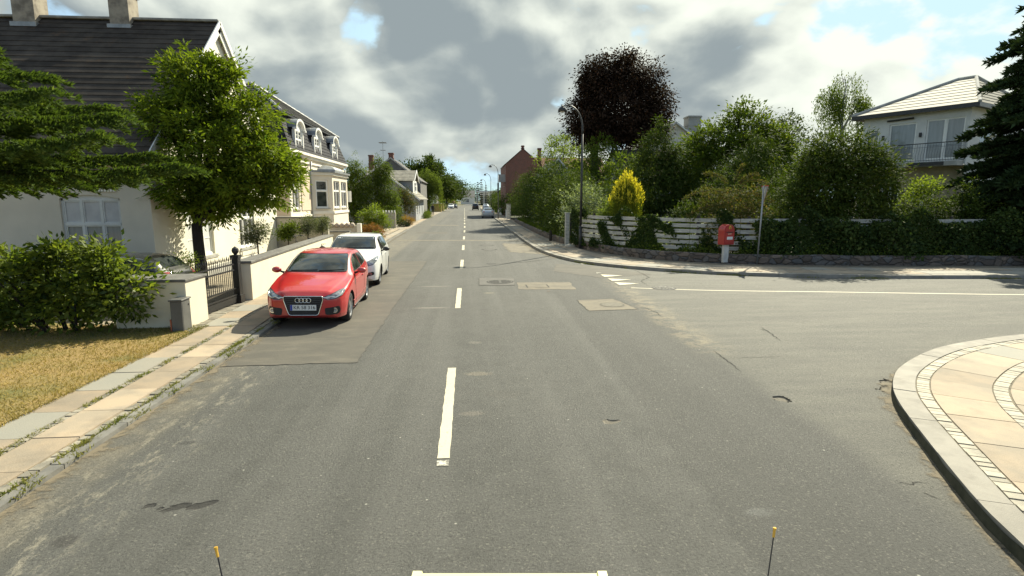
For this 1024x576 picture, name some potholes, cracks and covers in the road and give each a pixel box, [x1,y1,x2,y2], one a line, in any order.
pothole [158,502,192,513]
pothole [185,500,219,510]
